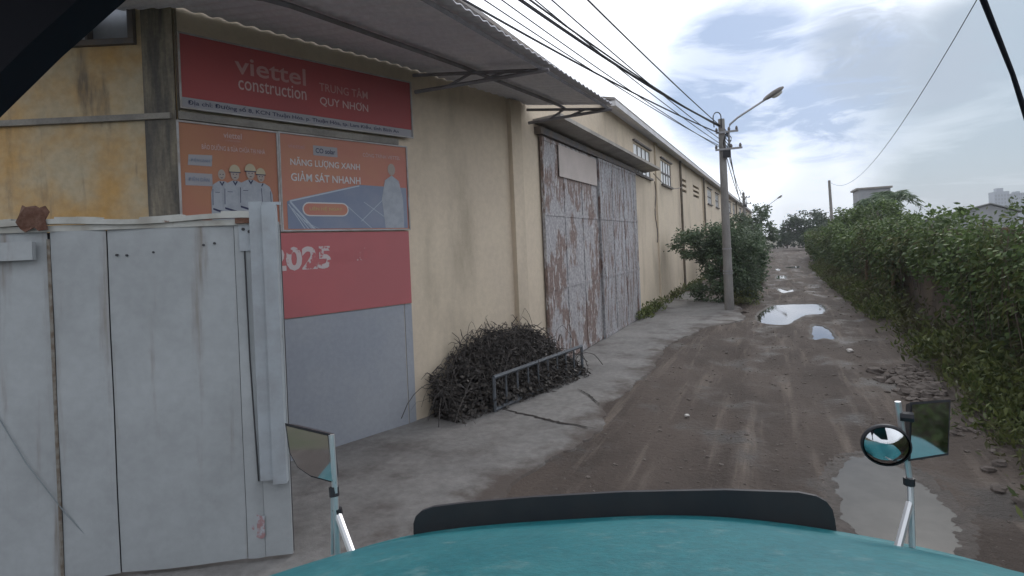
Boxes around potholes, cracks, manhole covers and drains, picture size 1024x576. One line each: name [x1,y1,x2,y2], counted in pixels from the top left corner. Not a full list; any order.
pothole [751,303,832,326]
crack [504,389,600,429]
pothole [808,447,1000,565]
pothole [804,323,843,341]
